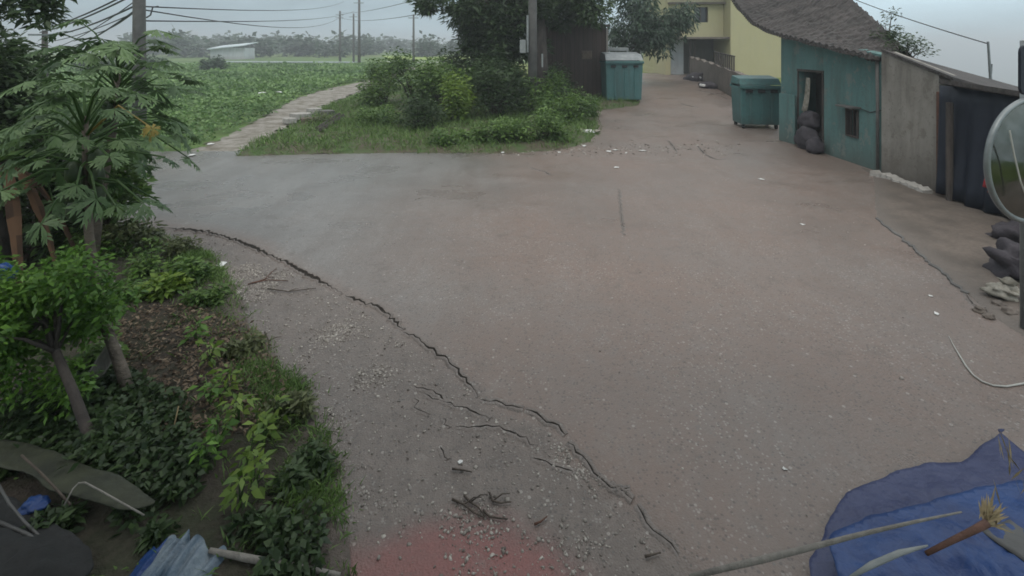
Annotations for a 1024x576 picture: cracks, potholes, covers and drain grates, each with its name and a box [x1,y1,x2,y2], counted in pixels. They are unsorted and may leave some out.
crack [963,293,987,309]
crack [162,227,680,558]
crack [696,145,726,160]
